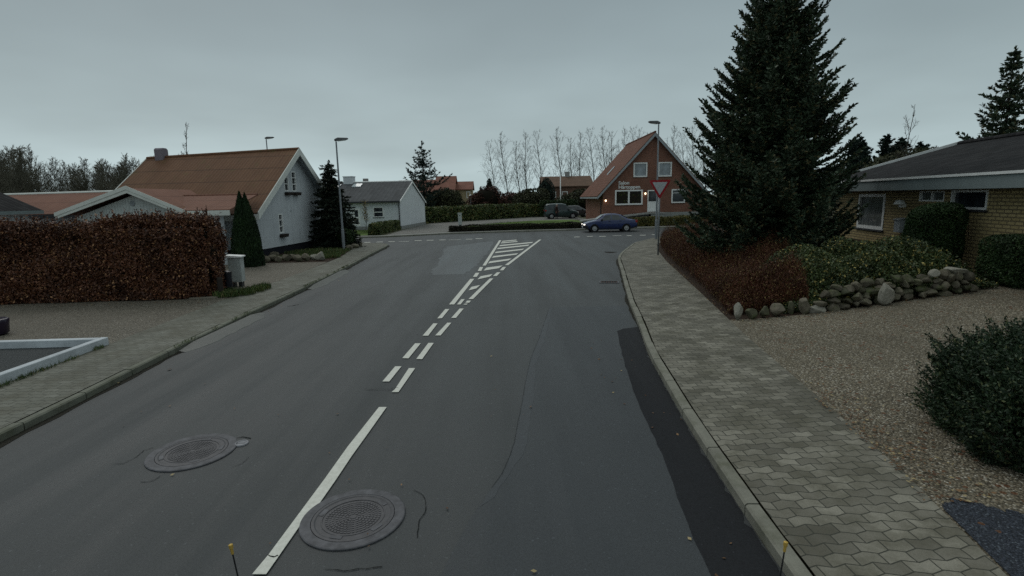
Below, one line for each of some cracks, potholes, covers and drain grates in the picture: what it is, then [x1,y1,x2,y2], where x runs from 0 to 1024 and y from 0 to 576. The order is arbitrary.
manhole cover [144,433,238,472]
manhole cover [299,489,405,551]
